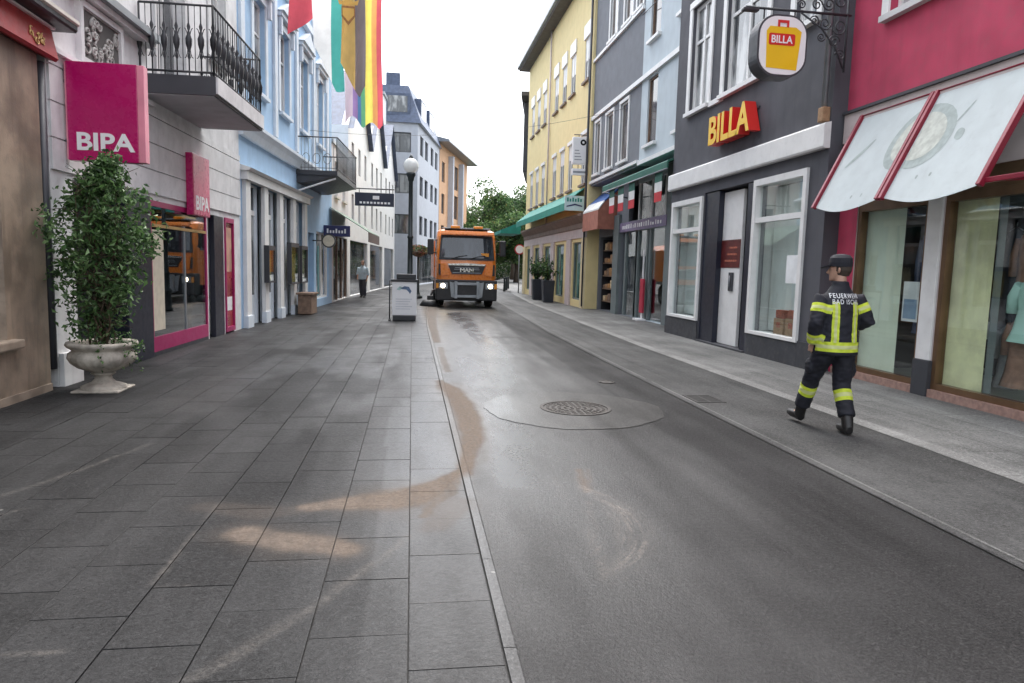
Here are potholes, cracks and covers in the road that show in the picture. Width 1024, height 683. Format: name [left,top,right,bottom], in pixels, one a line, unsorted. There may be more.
manhole cover [540,401,611,416]
drain grate [682,395,727,403]
